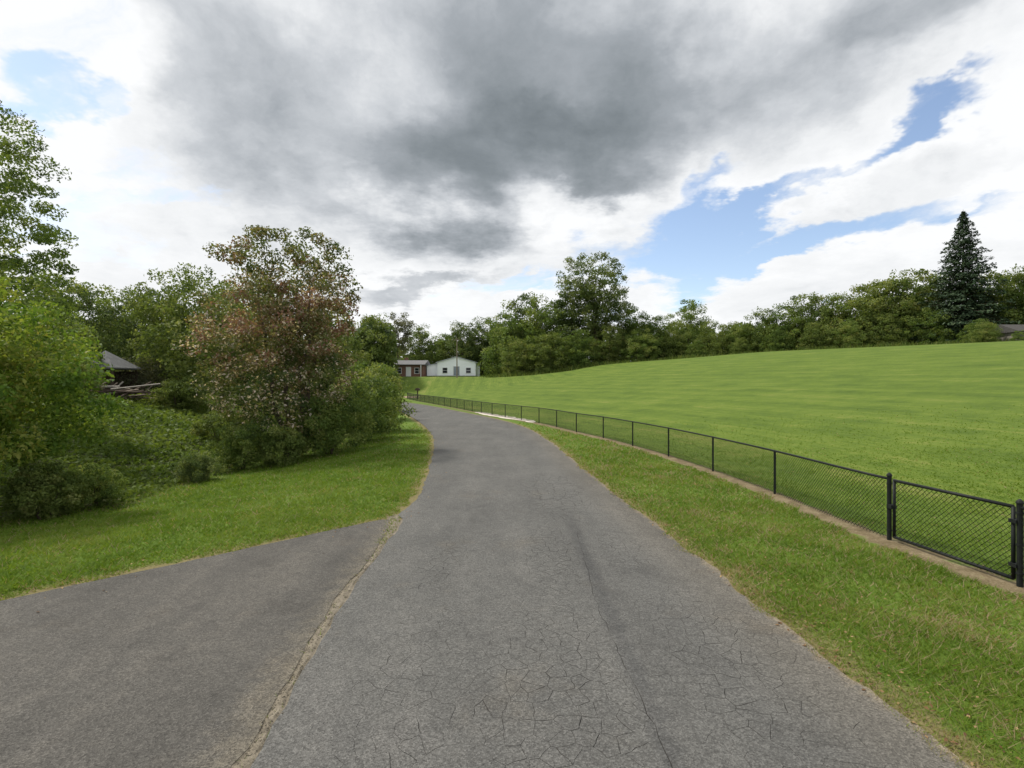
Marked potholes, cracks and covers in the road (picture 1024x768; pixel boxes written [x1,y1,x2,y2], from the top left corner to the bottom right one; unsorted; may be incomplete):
crack [230,514,469,768]
crack [634,586,885,768]
crack [463,475,673,768]
